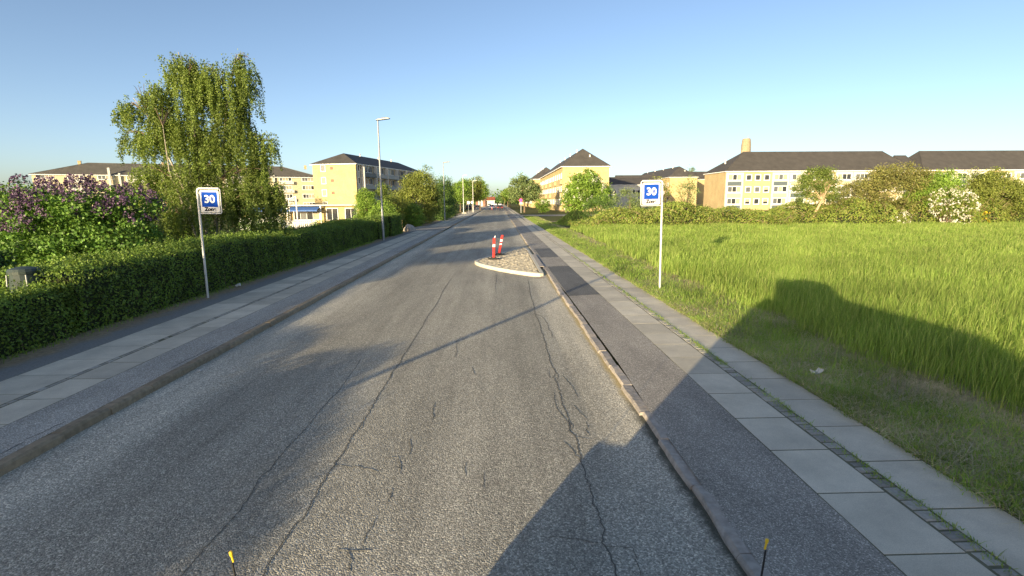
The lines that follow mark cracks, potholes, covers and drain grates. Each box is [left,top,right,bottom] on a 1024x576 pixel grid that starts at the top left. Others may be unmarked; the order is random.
crack [528,282,641,576]
crack [263,278,452,576]
crack [181,360,360,576]
